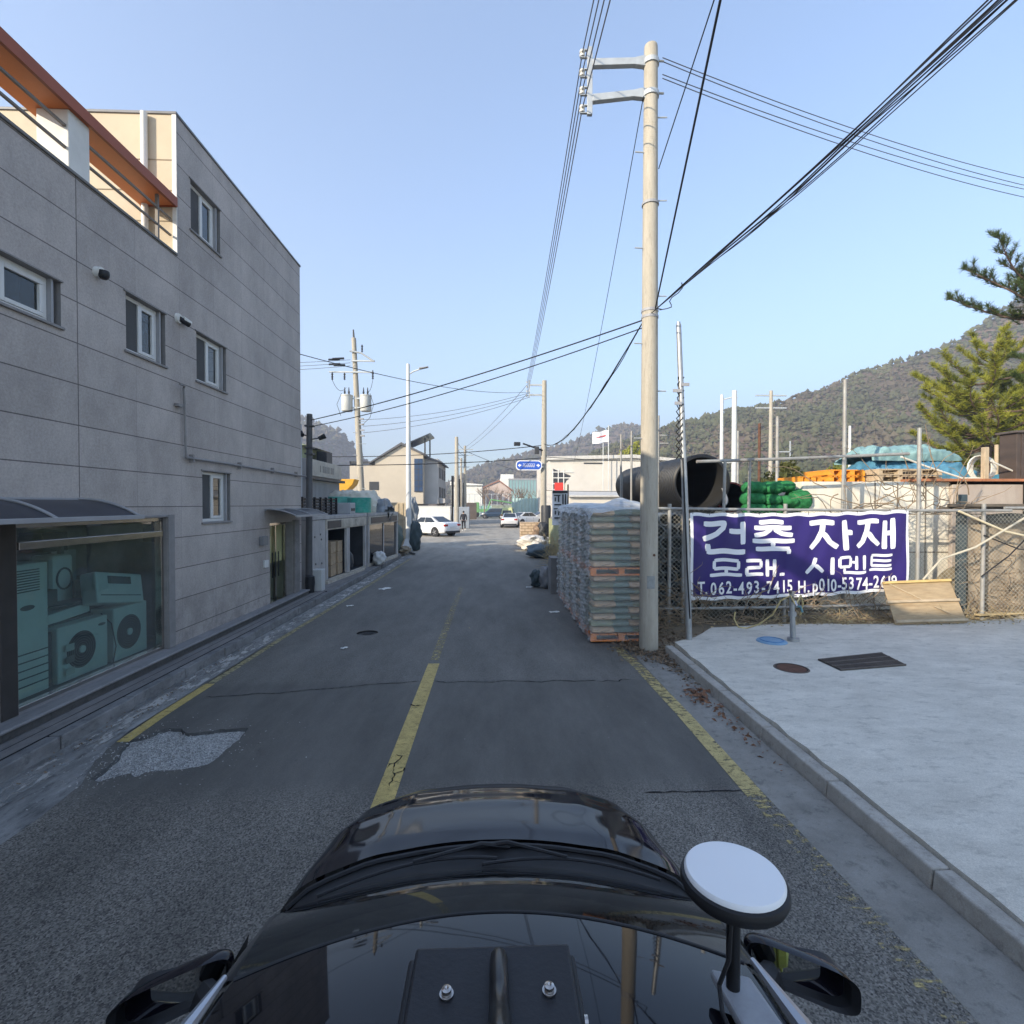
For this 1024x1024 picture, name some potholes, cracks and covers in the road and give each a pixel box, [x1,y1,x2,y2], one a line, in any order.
crack [208,679,631,697]
manhole cover [773,663,810,674]
crack [388,754,405,786]
drain grate [818,652,906,671]
